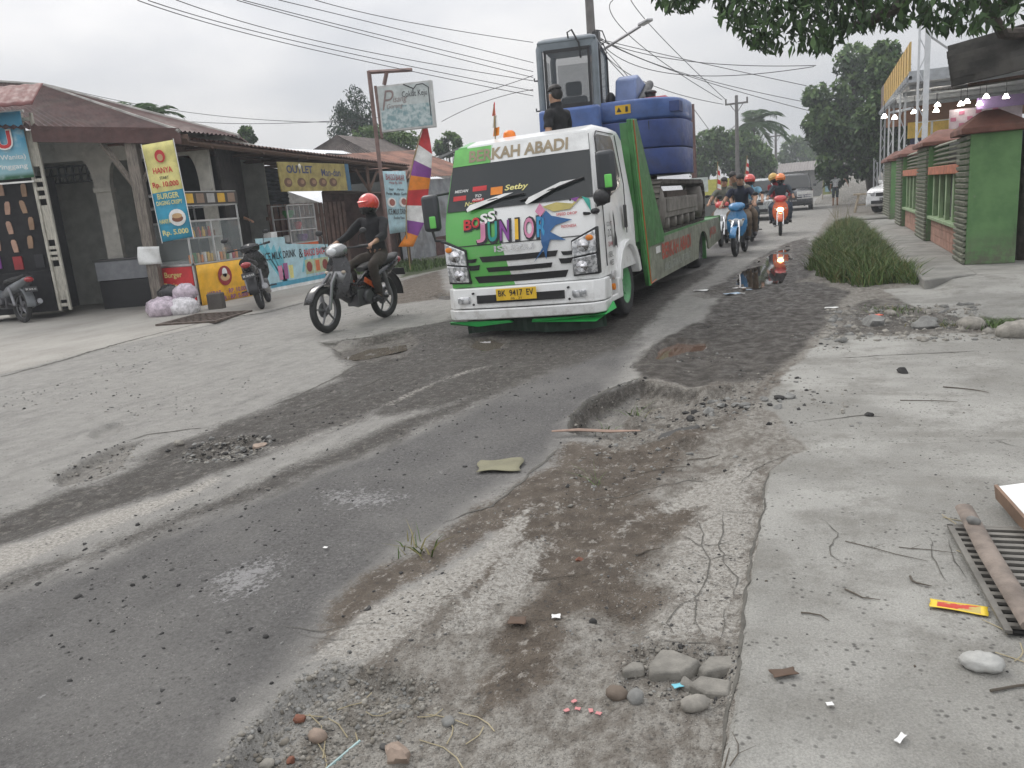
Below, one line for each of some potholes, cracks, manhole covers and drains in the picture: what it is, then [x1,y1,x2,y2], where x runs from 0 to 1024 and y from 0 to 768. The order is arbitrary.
pothole [613,641,736,704]
crack [576,442,945,761]
pothole [731,253,794,290]
pothole [564,377,776,446]
pothole [443,612,495,641]
pothole [315,330,425,364]
pothole [664,434,713,453]
pothole [644,337,711,362]
crack [930,538,966,580]
drain grate [947,524,1024,636]
pothole [181,435,270,464]
